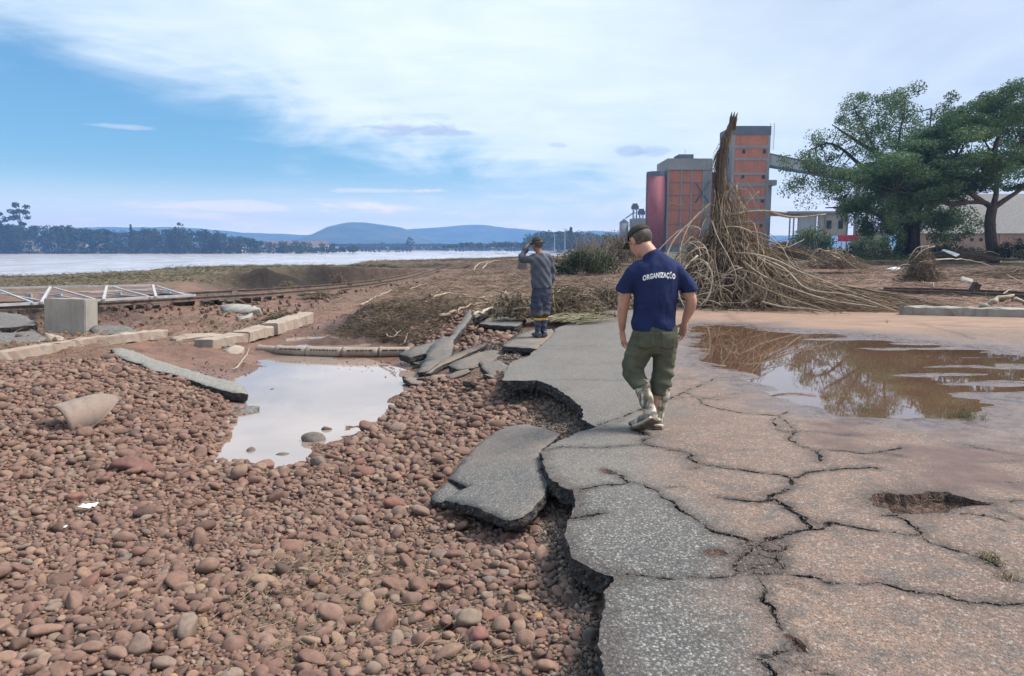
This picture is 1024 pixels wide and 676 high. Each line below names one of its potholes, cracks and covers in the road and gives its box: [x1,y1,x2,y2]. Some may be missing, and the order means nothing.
pothole [869,491,995,514]
pothole [703,548,729,556]
crack [559,379,1024,635]
crack [755,649,834,676]
